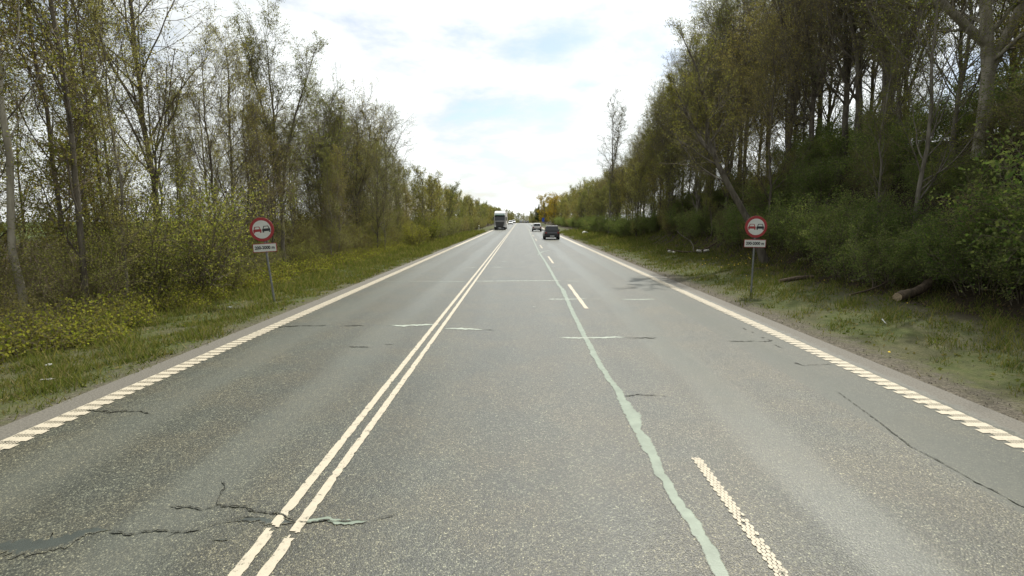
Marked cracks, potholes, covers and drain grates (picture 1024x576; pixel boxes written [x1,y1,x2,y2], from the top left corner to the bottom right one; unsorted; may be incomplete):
crack [0,479,402,559]
